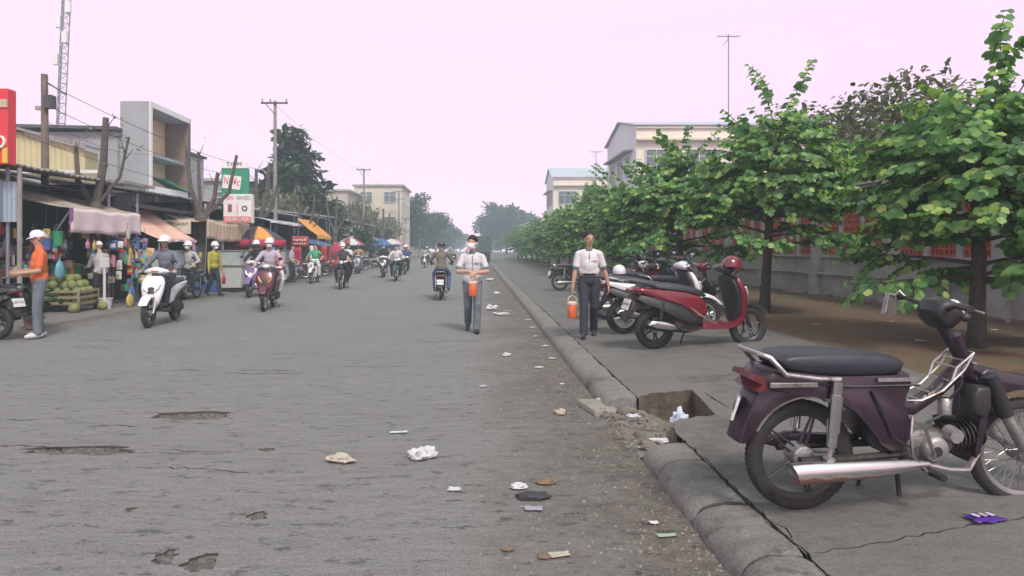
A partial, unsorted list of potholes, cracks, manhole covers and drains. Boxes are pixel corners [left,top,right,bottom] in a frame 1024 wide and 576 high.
pothole [151,411,231,420]
pothole [178,553,219,572]
crack [814,516,1024,564]
pothole [245,511,268,521]
pothole [151,549,180,564]
crack [169,449,251,474]
pothole [23,446,135,456]
